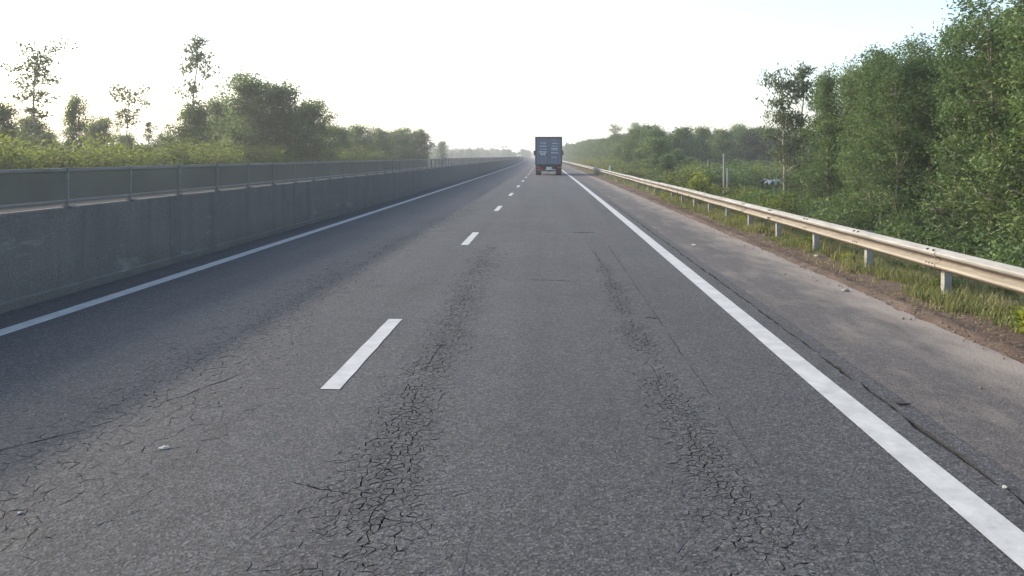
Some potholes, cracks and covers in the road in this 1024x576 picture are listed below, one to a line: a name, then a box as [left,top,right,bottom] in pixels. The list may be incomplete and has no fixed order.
crack [592,250,864,576]
crack [0,202,476,572]
